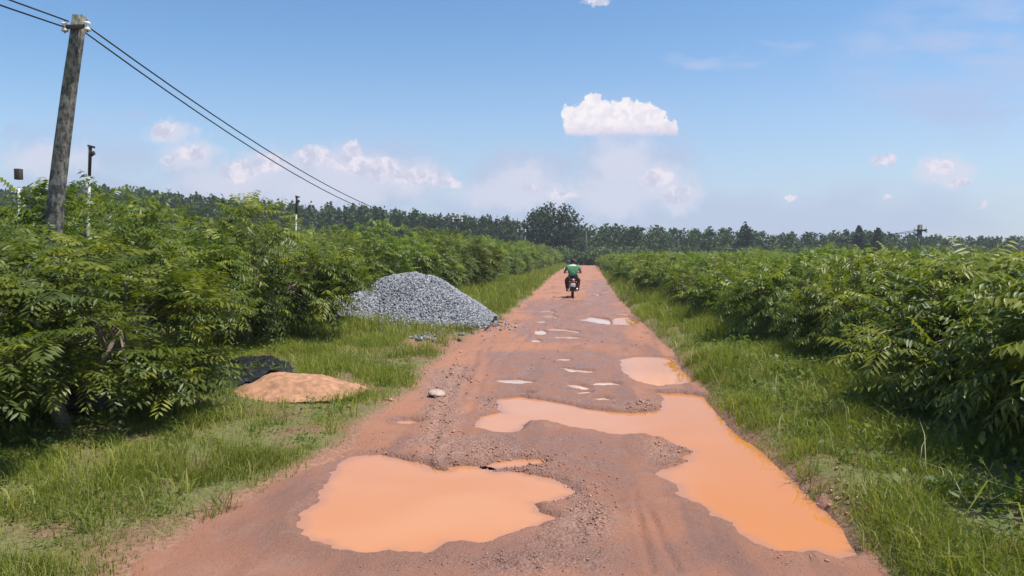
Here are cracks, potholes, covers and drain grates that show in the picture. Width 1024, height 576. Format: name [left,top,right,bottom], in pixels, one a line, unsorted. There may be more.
pothole [472,389,862,559]
pothole [612,315,639,325]
pothole [291,451,580,553]
pothole [618,356,694,386]
pothole [575,316,611,325]
